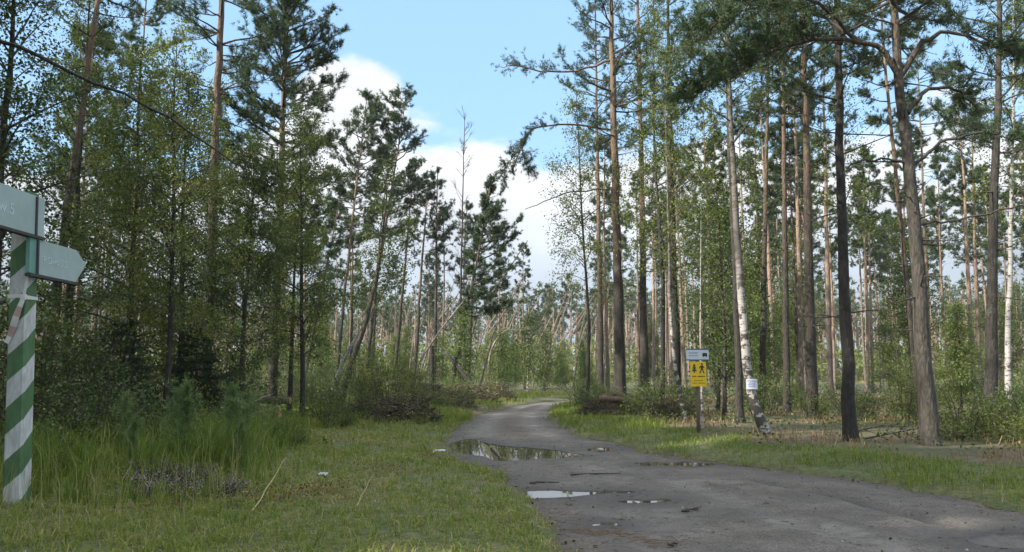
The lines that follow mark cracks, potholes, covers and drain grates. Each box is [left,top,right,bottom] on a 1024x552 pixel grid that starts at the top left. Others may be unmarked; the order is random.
pothole [521,489,637,499]
pothole [448,439,585,461]
